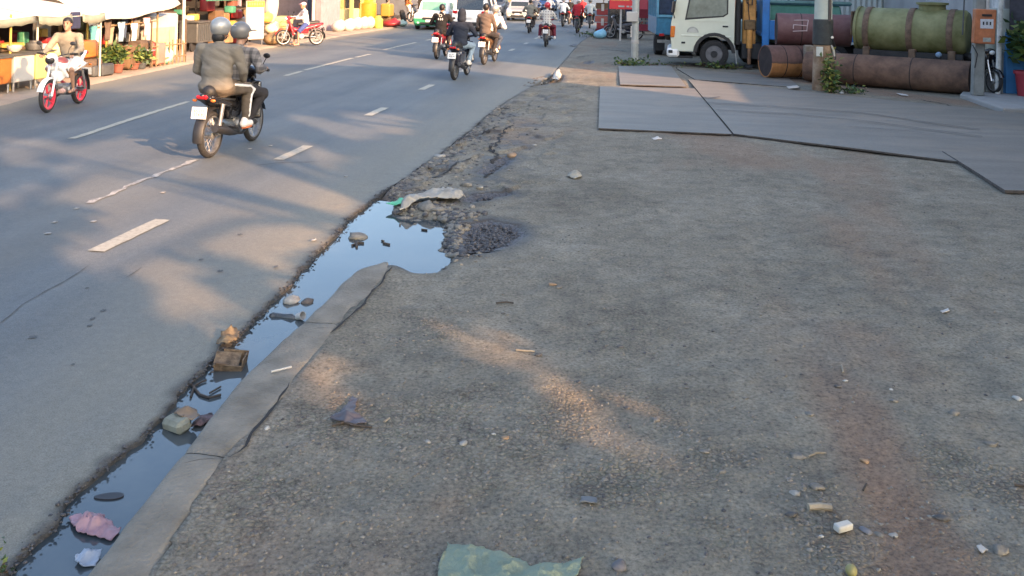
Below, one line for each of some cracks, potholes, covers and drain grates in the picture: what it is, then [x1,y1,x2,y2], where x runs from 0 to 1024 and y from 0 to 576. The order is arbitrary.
crack [389,108,513,190]
pothole [454,220,526,253]
crack [0,266,87,323]
